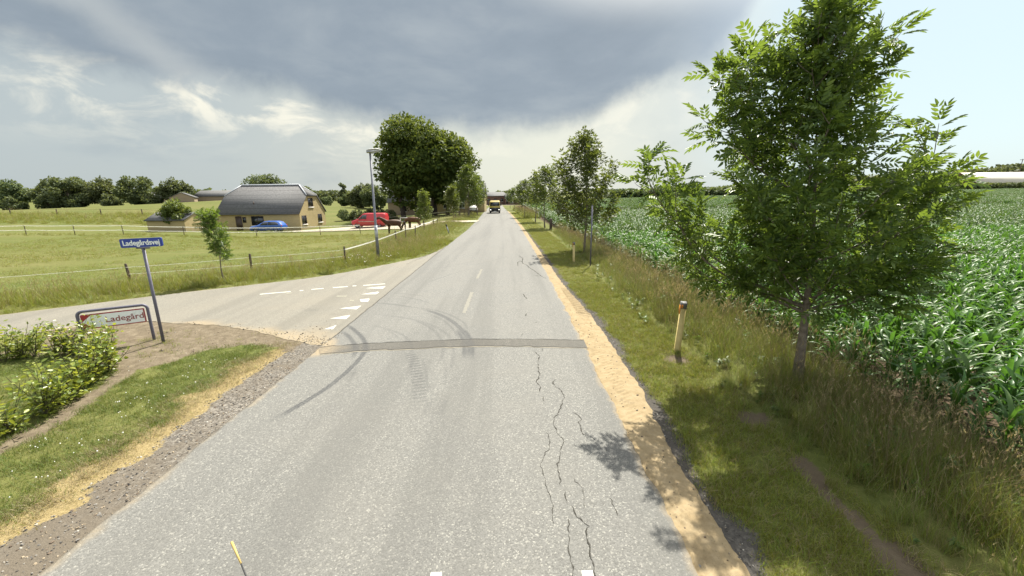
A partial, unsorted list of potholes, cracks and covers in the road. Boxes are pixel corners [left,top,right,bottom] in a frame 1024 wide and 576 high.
crack [534,349,596,576]
